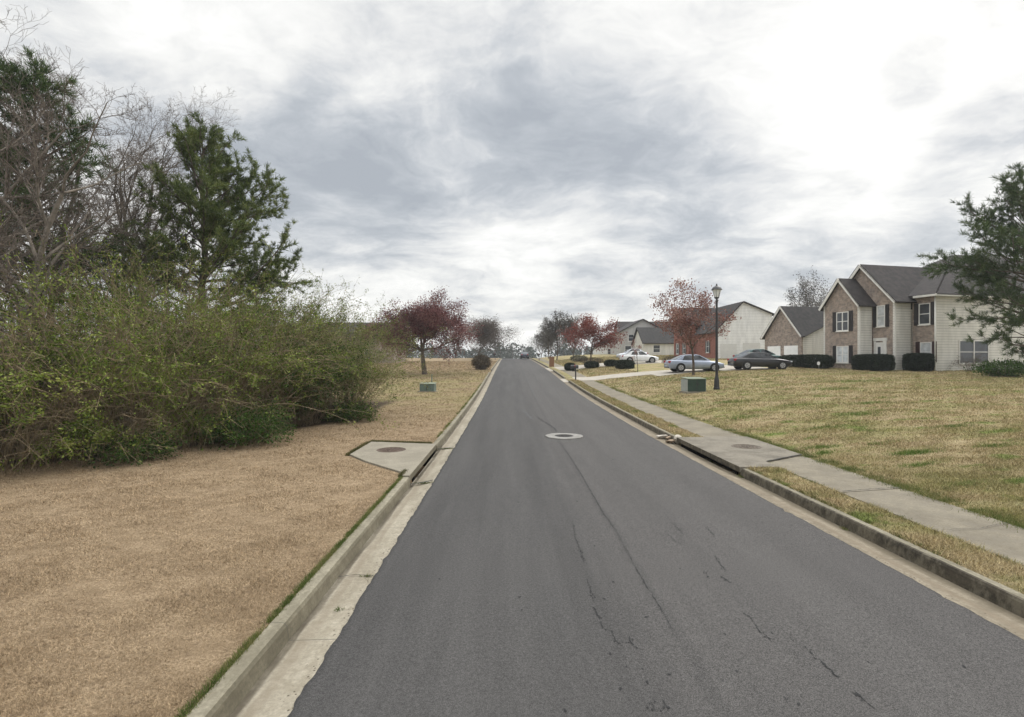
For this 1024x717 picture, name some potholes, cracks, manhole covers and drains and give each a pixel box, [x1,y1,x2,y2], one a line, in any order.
crack [587,579,638,648]
drain grate [677,436,802,475]
drain grate [350,442,437,482]
crack [790,637,874,708]
